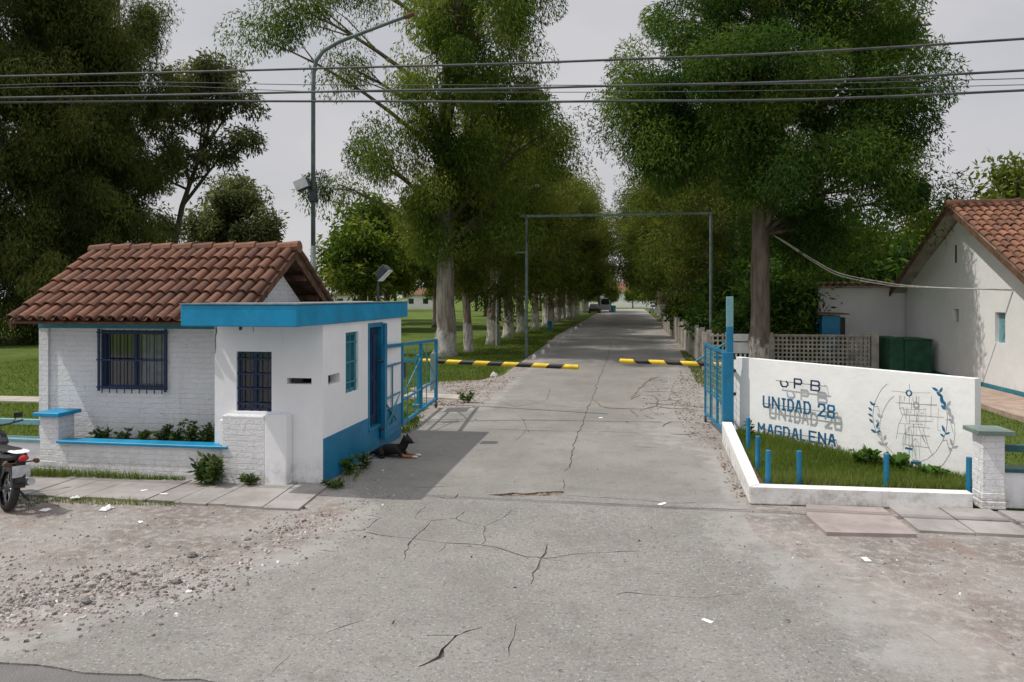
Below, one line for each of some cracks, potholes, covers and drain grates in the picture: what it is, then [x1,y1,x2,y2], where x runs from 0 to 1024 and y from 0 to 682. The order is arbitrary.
crack [496,377,699,440]
crack [354,506,626,585]
crack [418,627,483,667]
